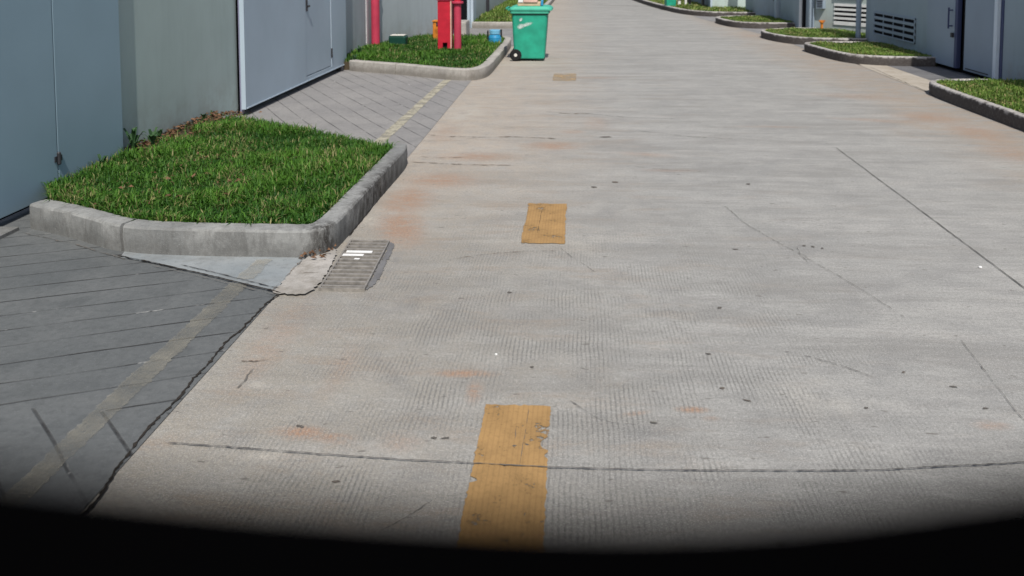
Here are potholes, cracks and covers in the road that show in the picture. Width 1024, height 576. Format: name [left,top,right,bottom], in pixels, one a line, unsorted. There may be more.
drain grate [318,239,390,292]
